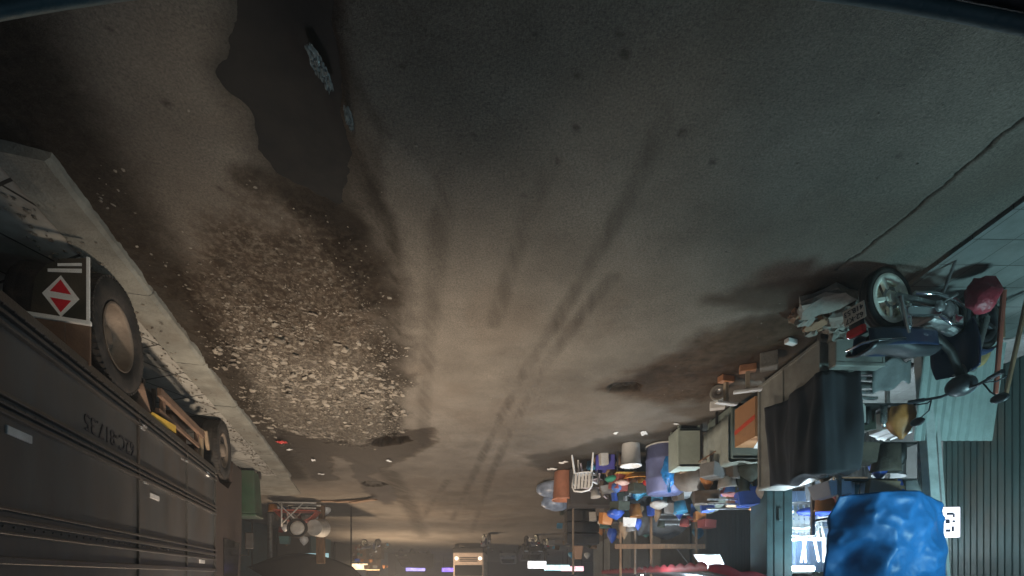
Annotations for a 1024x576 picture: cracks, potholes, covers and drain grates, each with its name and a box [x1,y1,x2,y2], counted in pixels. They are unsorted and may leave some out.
crack [834,113,1024,269]
pothole [368,434,416,447]
pothole [602,379,648,395]
